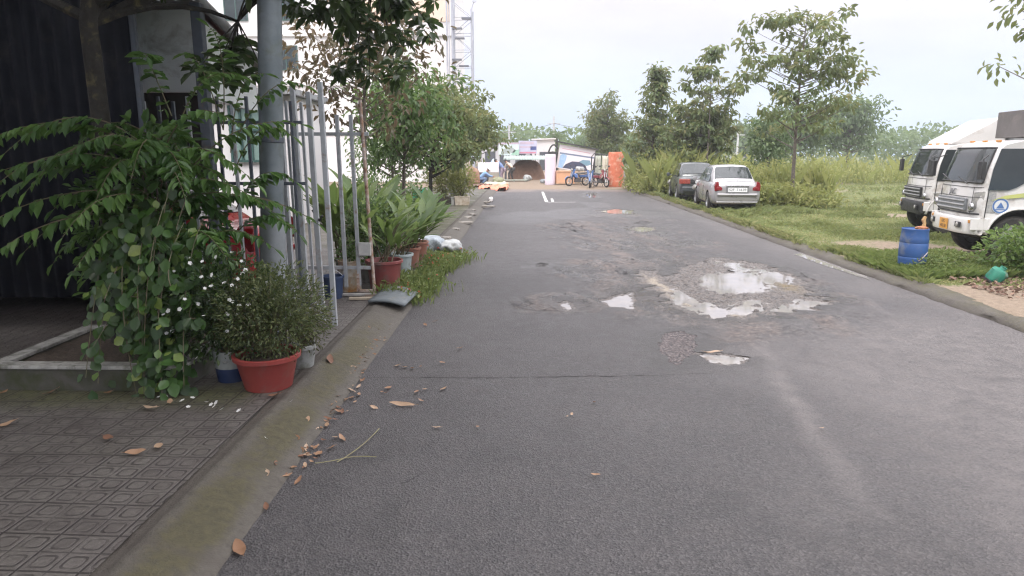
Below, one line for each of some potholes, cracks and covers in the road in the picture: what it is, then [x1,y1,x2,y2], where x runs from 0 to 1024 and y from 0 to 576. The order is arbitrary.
pothole [693,352,751,366]
pothole [599,291,637,309]
pothole [632,257,841,320]
pothole [557,300,576,312]
